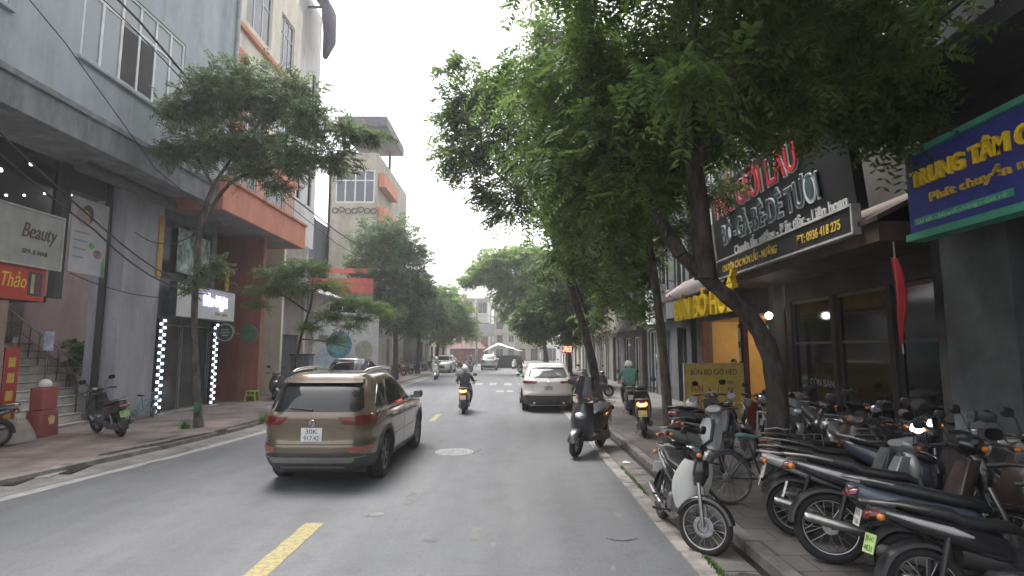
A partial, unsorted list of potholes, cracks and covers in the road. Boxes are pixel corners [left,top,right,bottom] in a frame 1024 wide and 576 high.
manhole cover [435,448,474,456]
